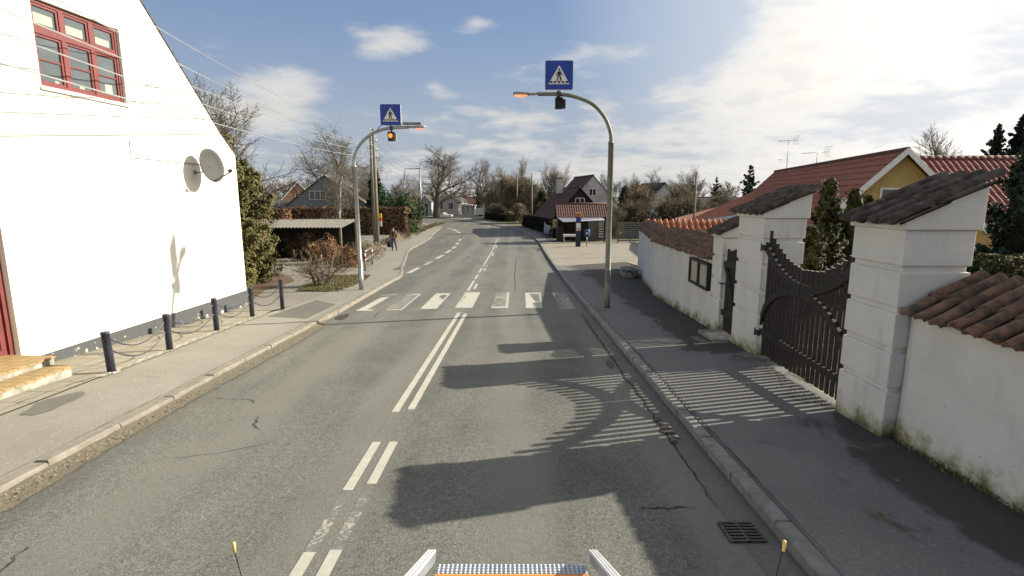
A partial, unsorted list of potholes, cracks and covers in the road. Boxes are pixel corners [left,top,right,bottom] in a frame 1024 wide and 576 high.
drain grate [717,521,768,542]
